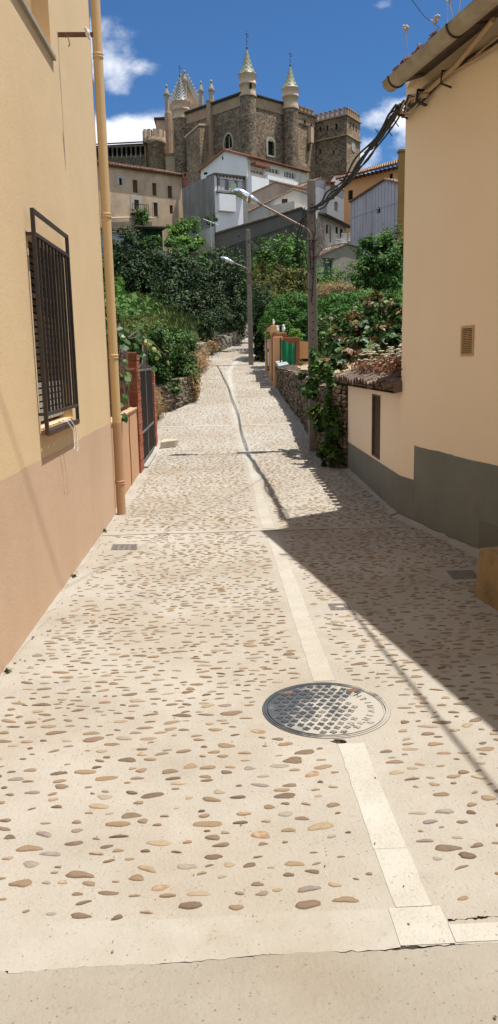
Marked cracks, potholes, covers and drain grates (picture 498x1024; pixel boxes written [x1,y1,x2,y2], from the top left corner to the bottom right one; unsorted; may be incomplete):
manhole cover [262,682,391,740]
